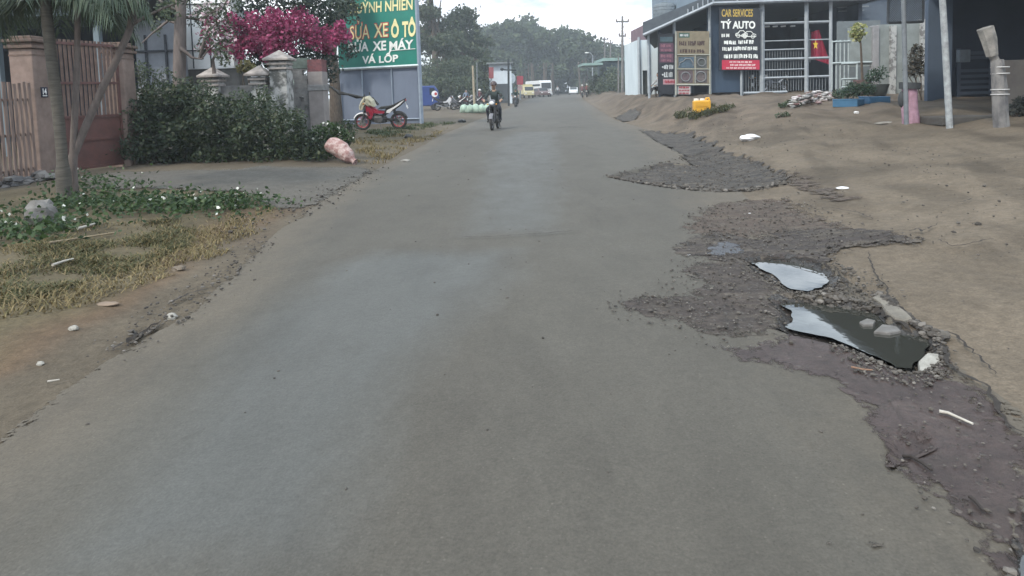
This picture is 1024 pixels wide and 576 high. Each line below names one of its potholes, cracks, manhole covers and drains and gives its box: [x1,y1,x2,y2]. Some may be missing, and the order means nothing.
pothole [639,130,725,160]
pothole [768,294,948,374]
pothole [744,254,840,294]
pothole [609,151,790,192]
